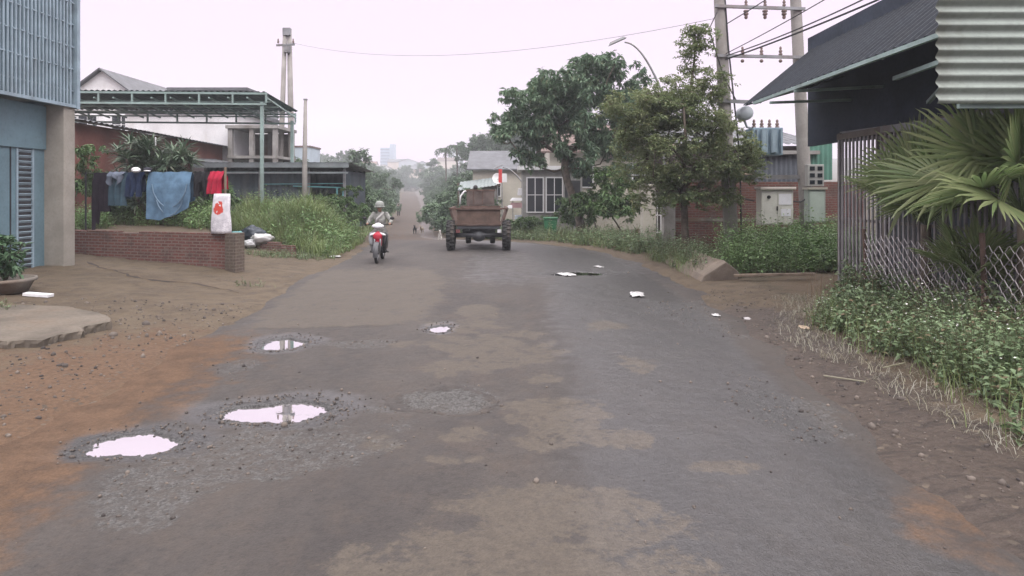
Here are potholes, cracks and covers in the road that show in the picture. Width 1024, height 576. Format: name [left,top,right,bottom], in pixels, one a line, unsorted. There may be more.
pothole [71,428,197,459]
pothole [425,324,454,334]
crack [85,261,238,293]
pothole [204,397,344,426]
pothole [253,336,315,352]
